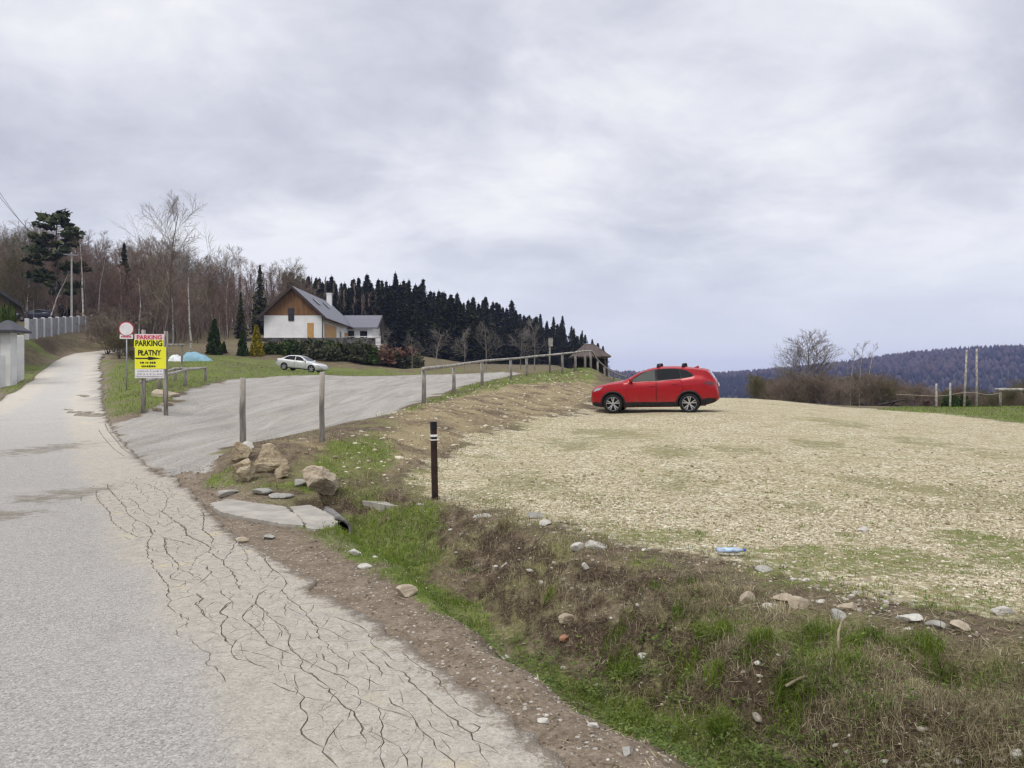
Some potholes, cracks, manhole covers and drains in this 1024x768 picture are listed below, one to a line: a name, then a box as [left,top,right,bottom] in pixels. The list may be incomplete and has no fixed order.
crack [80,477,501,768]
crack [99,423,128,456]
